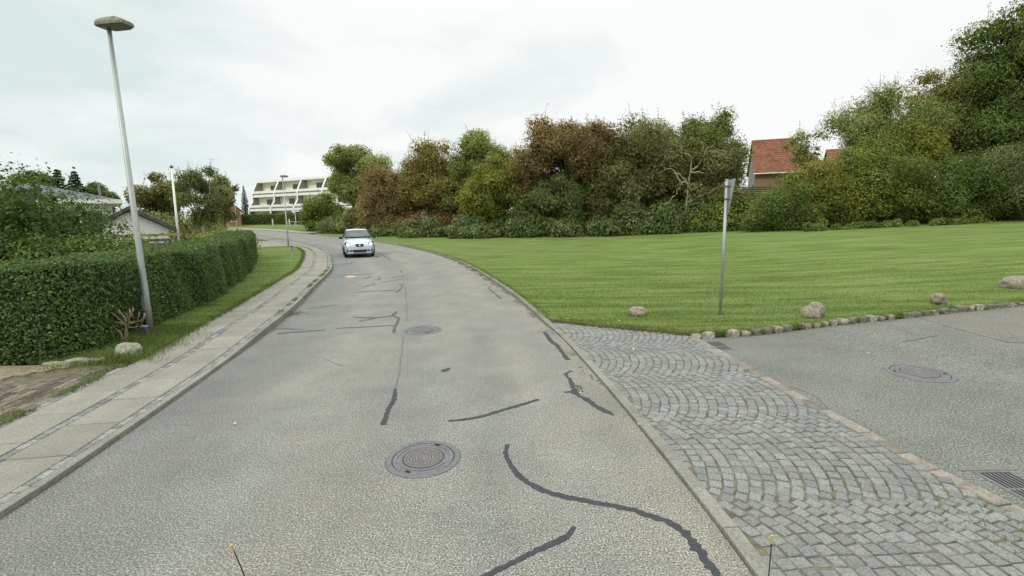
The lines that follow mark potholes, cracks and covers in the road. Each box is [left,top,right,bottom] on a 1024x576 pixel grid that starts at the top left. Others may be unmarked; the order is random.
manhole cover [883,364,959,383]
drain grate [958,465,1024,500]
drain grate [704,341,734,350]
manhole cover [385,440,461,479]
manhole cover [404,326,442,335]
